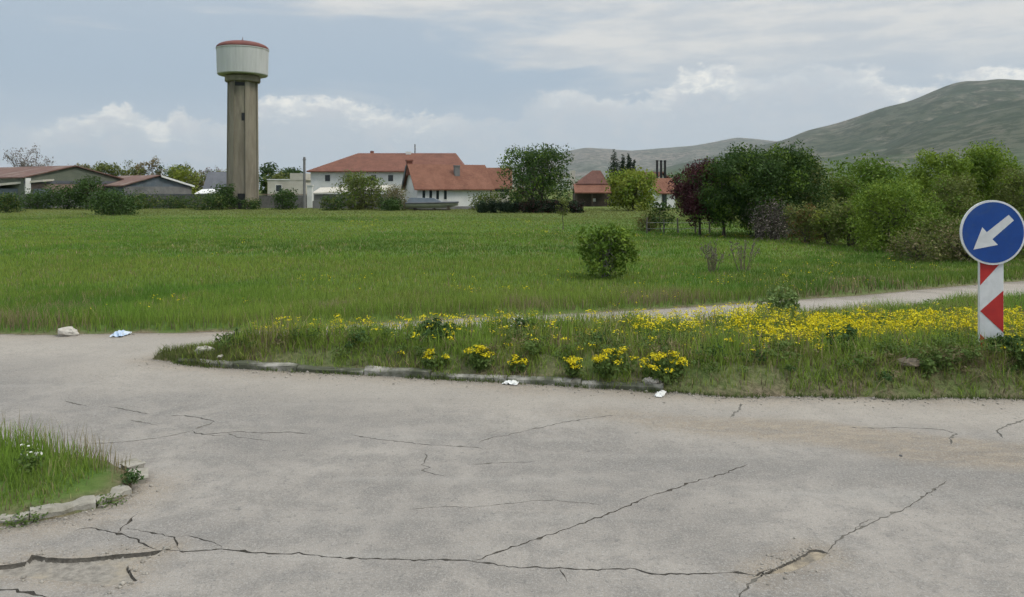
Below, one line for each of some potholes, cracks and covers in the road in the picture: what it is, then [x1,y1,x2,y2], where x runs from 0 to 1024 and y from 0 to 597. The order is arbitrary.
crack [66,401,305,444]
crack [0,589,46,597]
crack [354,415,612,476]
crack [852,427,958,445]
crack [828,481,946,551]
crack [996,420,1023,438]
crack [78,465,773,597]
